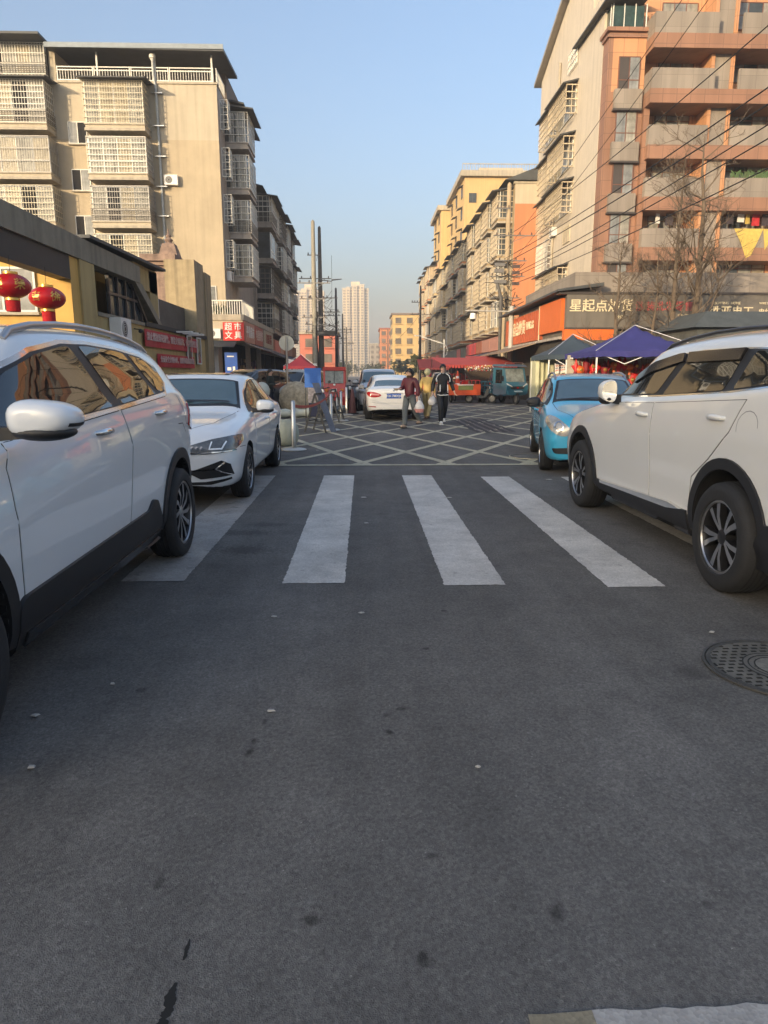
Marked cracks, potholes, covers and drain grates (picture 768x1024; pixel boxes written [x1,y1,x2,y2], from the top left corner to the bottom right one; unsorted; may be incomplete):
manhole cover [702,640,768,695]
crack [156,939,190,1024]
